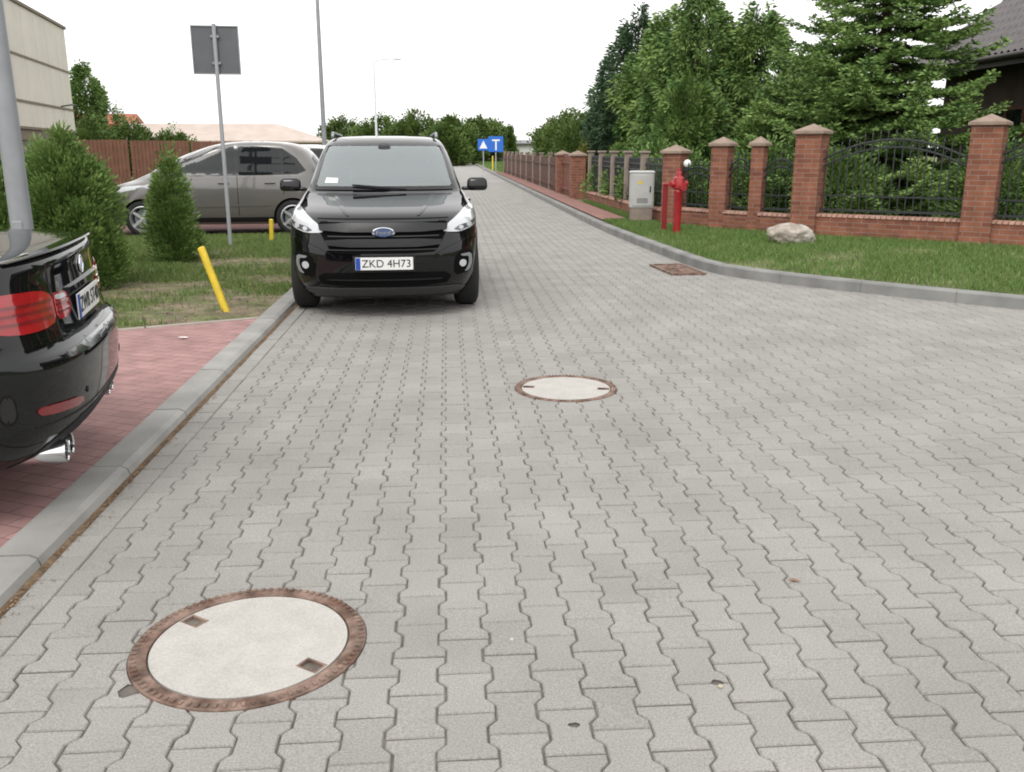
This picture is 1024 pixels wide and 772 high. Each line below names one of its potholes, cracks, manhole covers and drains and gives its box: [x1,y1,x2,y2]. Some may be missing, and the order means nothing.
manhole cover [127,587,366,712]
manhole cover [515,375,617,403]
